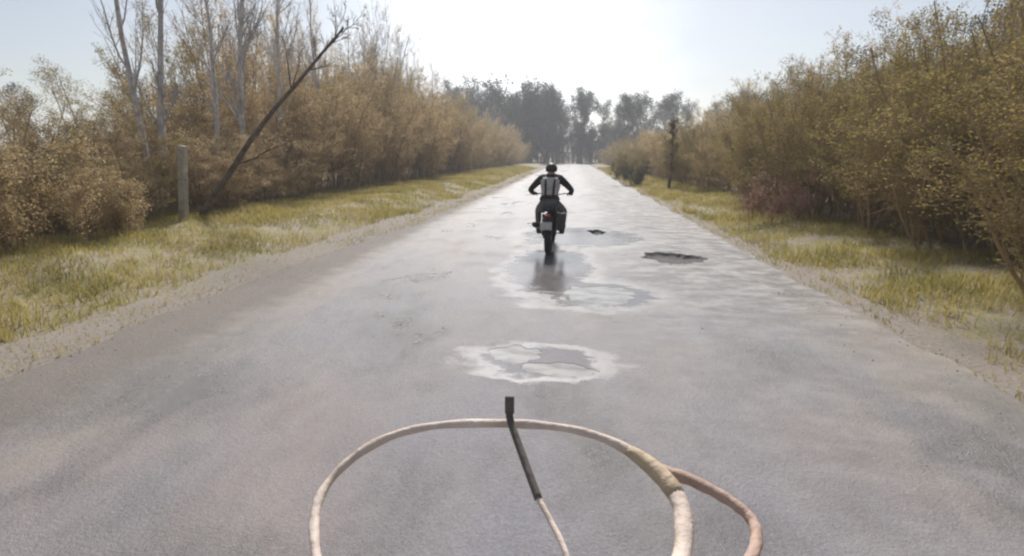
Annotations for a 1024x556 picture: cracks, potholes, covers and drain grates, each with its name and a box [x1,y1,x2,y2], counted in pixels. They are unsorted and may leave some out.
pothole [641,252,709,264]
pothole [488,345,542,364]
pothole [519,362,600,378]
